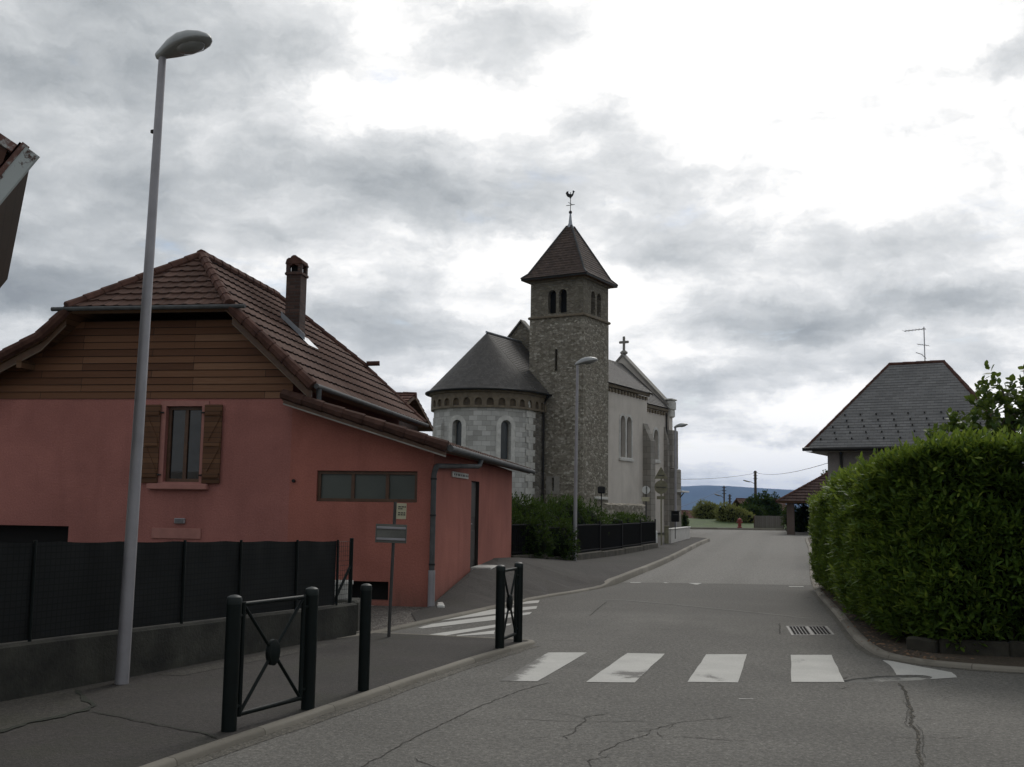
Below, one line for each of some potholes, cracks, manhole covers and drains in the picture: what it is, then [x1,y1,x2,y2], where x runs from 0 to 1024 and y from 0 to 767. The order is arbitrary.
crack [0,689,221,739]
crack [887,683,959,767]
crack [515,713,746,767]
drain grate [786,626,835,635]
